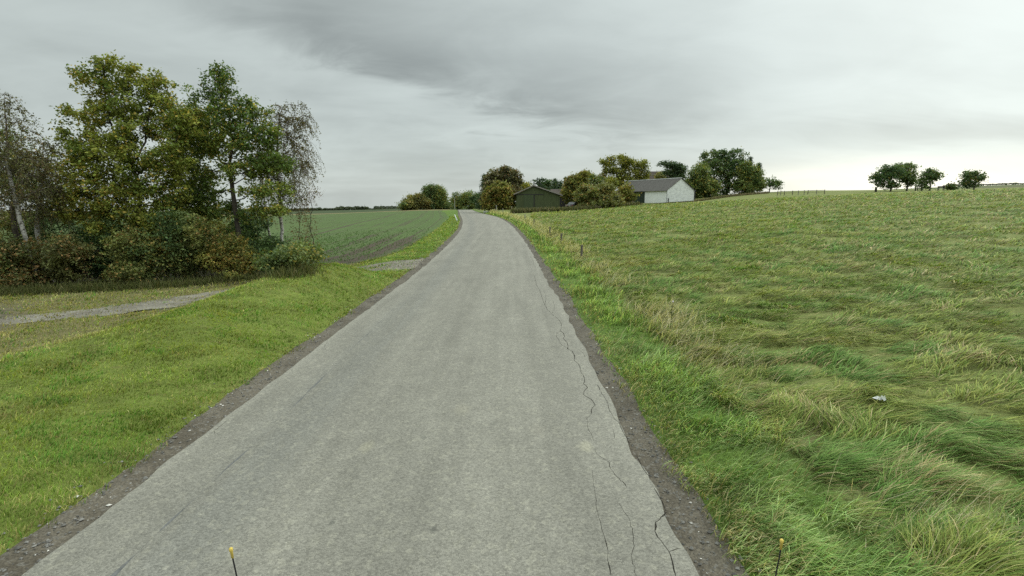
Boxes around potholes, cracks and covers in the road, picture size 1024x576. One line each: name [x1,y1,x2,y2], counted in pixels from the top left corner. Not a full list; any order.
crack [535,279,680,576]
